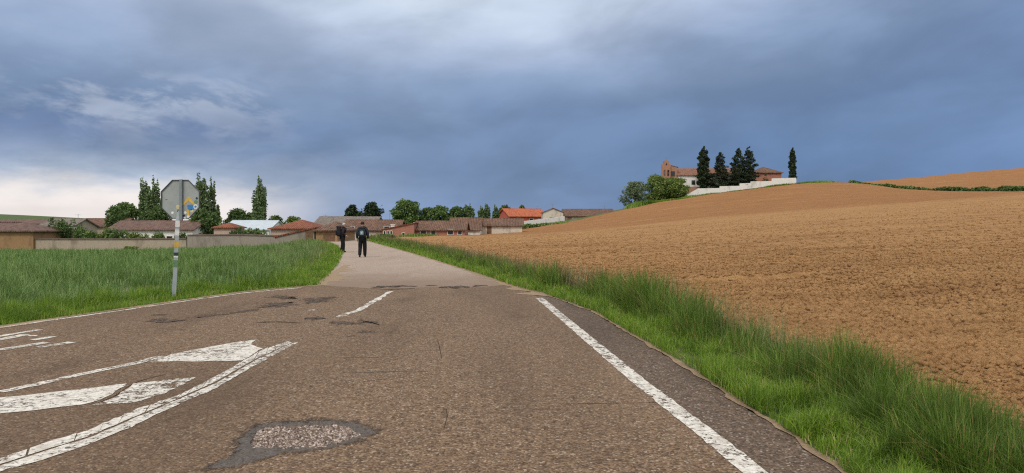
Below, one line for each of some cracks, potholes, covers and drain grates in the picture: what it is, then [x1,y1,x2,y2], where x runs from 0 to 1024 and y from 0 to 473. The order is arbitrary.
pothole [201,416,382,470]
